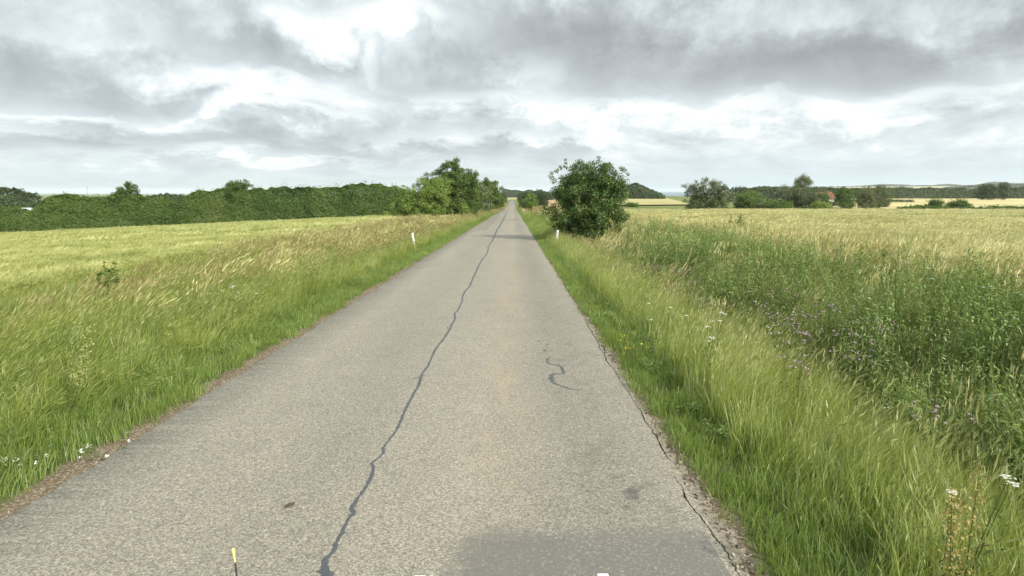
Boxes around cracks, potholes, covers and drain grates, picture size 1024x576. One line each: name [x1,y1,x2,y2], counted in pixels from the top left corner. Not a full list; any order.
crack [587,324,740,576]
